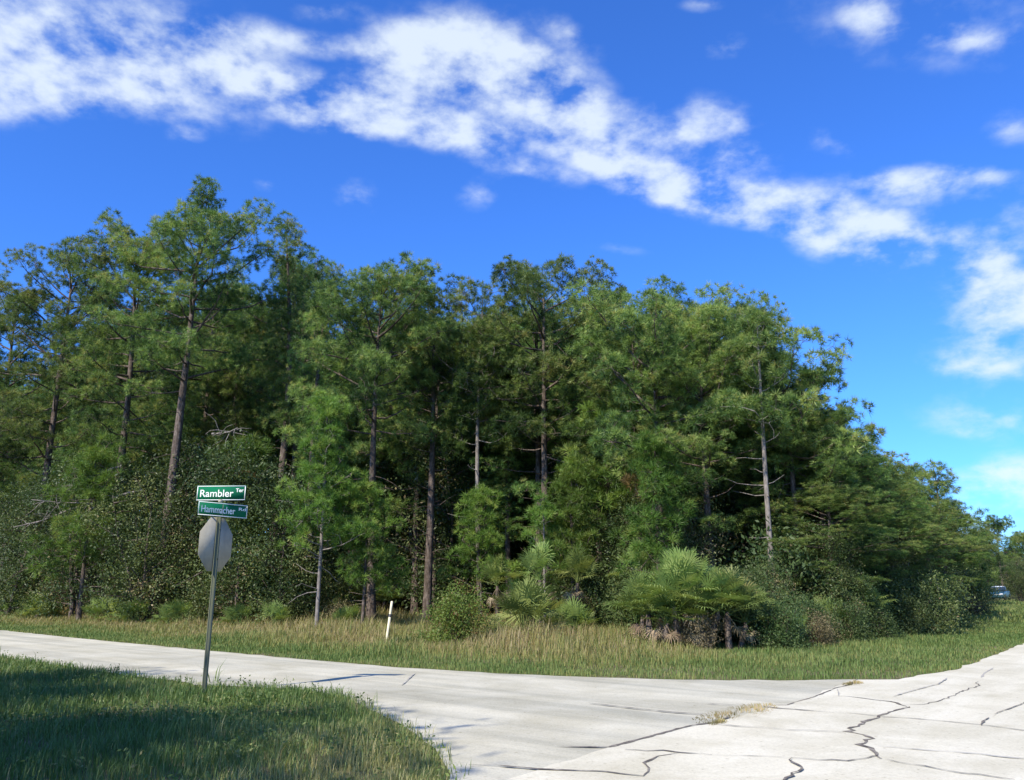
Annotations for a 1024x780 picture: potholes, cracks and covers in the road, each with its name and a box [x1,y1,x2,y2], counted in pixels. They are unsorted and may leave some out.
crack [473,668,1024,780]
